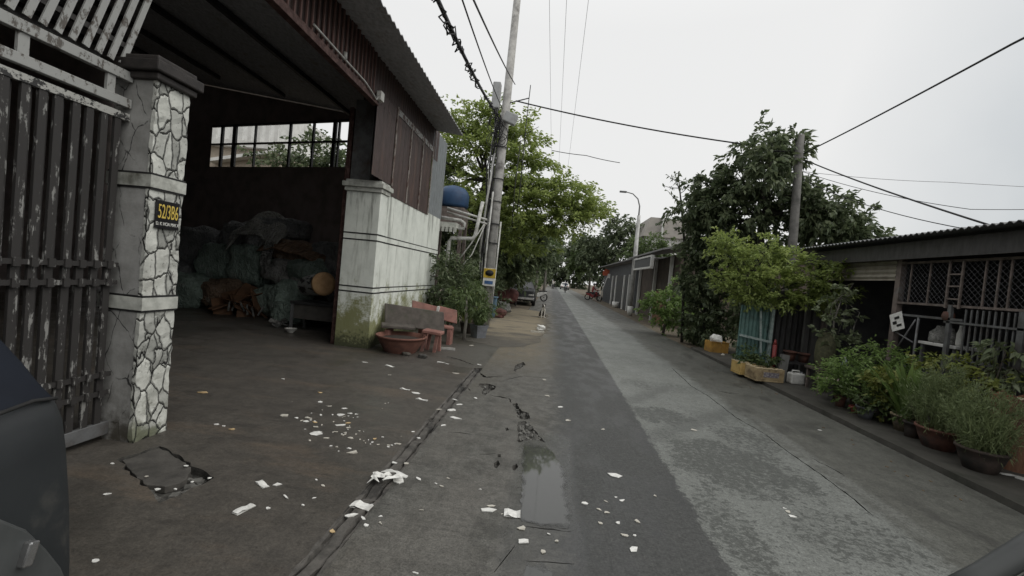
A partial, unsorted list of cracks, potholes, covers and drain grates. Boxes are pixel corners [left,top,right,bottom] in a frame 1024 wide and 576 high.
pothole [517,421,545,442]
crack [494,546,570,572]
pothole [513,403,530,419]
pothole [478,383,496,395]
